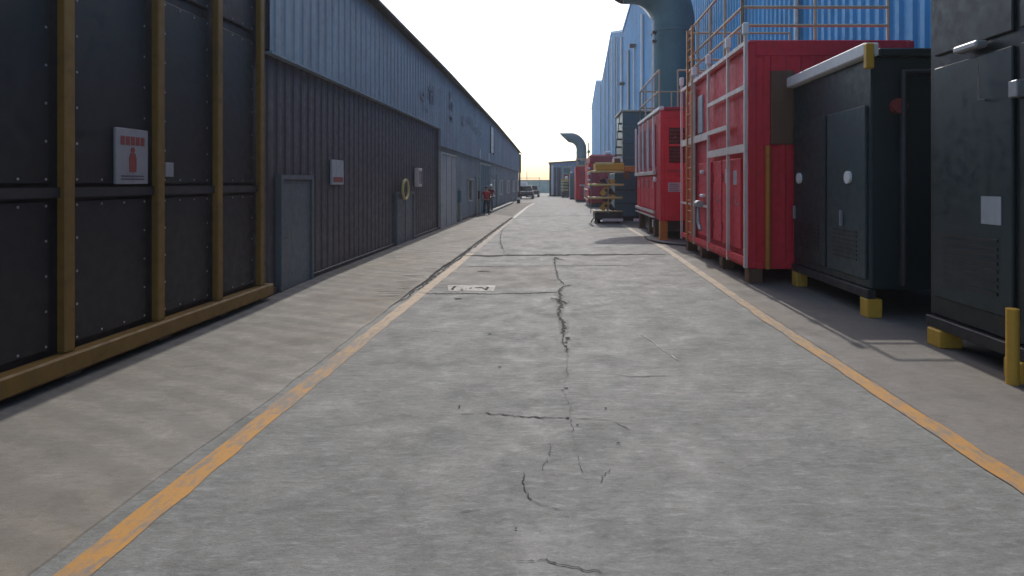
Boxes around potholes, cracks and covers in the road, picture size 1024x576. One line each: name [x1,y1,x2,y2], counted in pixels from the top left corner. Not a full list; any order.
crack [522,450,558,509]
crack [520,559,601,572]
crack [373,218,630,436]
